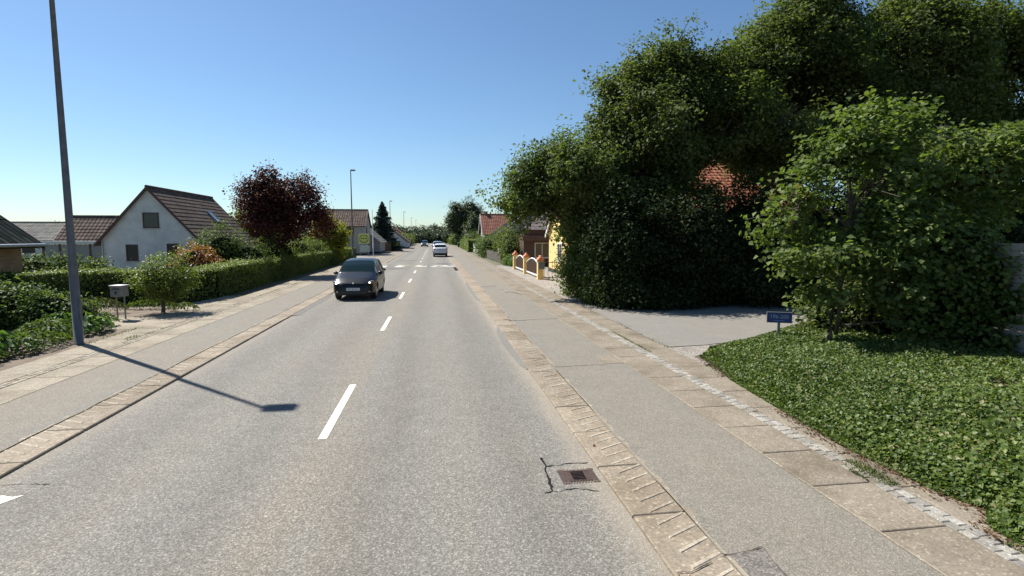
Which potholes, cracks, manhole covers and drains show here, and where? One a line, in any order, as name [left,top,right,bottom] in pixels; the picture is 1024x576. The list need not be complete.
drain grate [557,468,601,484]
